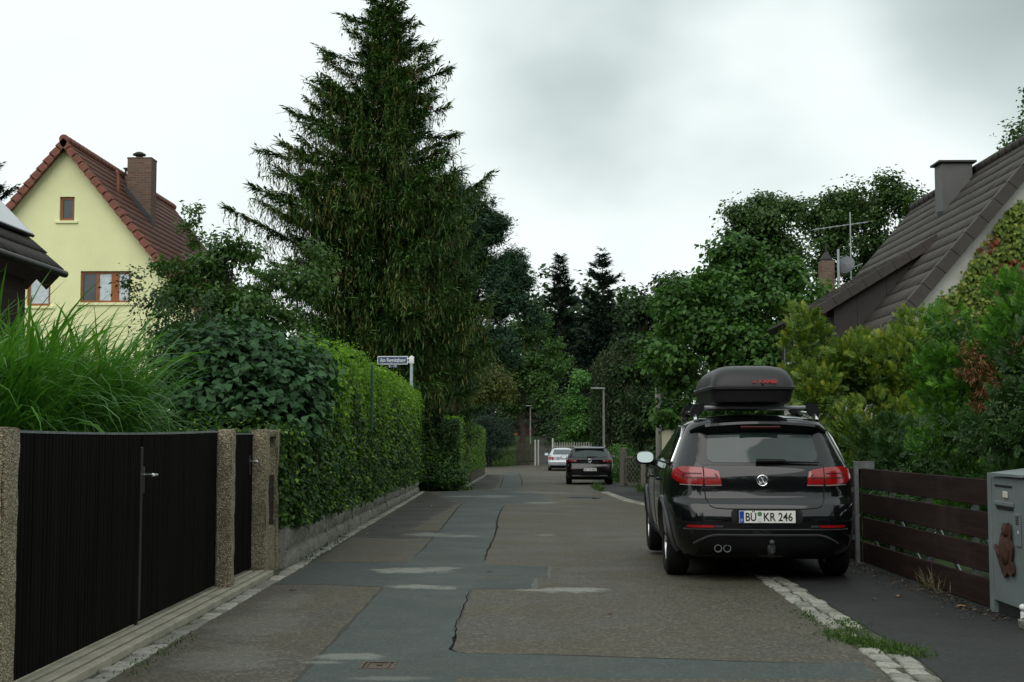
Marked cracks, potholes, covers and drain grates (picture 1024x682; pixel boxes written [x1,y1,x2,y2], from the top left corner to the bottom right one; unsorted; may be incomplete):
crack [484,506,504,559]
manhole cover [358,661,398,669]
